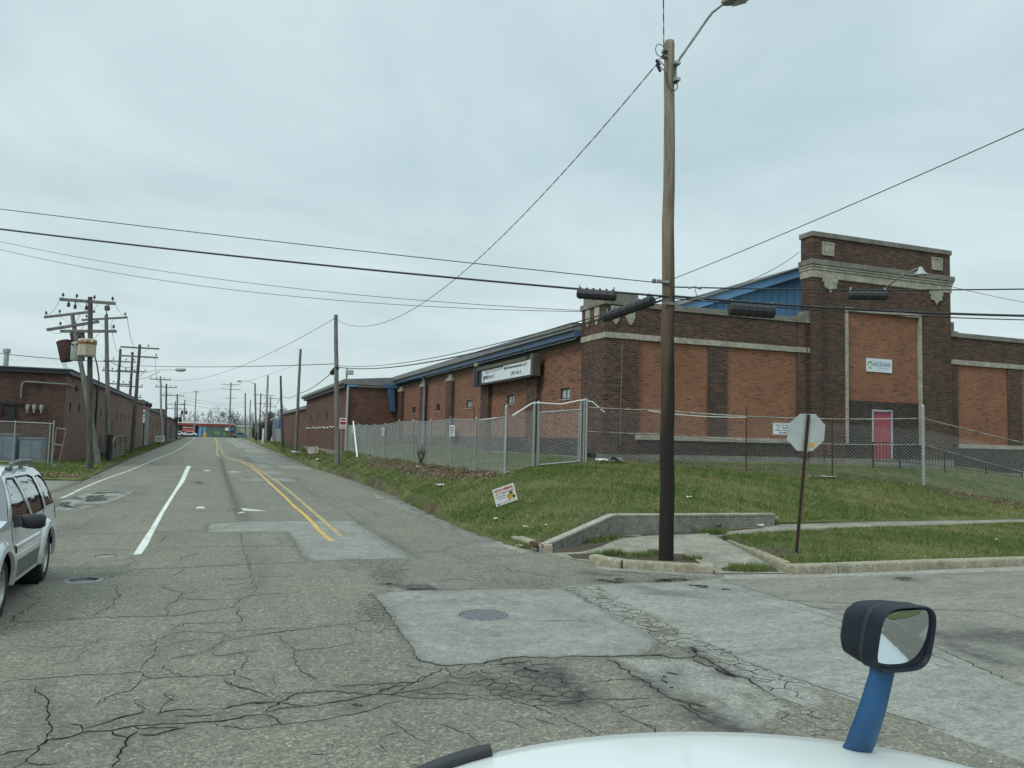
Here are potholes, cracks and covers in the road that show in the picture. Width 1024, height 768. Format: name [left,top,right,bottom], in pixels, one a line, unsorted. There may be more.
crack [0,507,941,768]
manhole cover [457,609,510,621]
